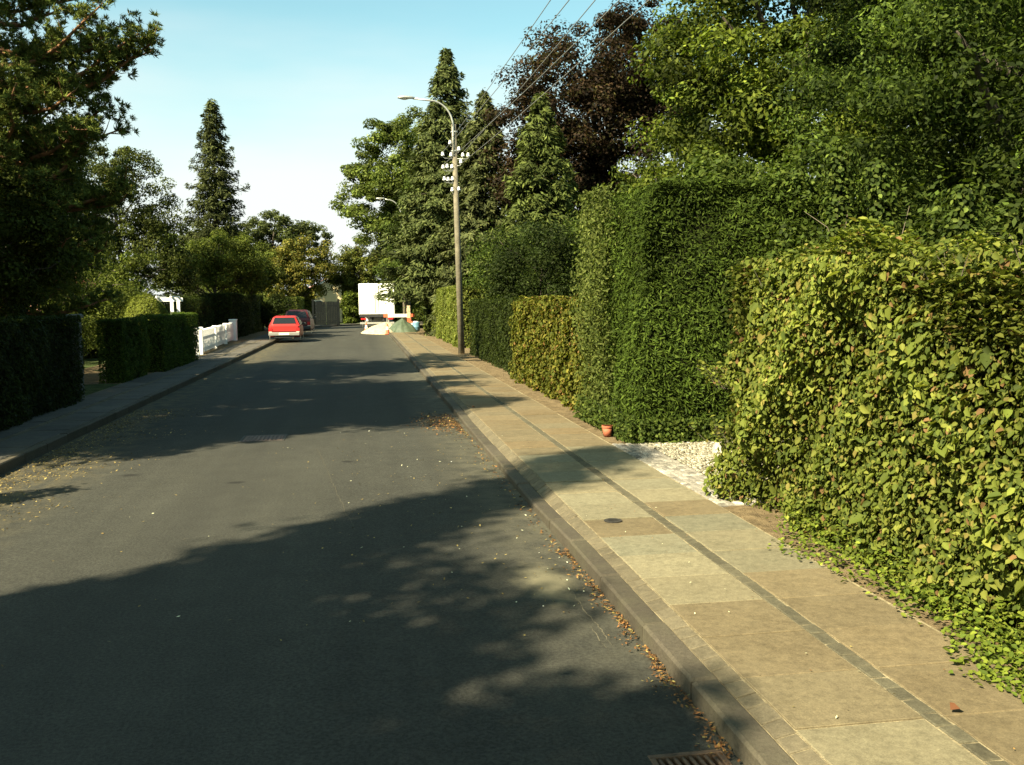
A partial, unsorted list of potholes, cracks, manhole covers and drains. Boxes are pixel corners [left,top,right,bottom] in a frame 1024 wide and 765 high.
crack [572,591,607,646]
drain grate [648,749,732,765]
crack [317,449,355,529]
